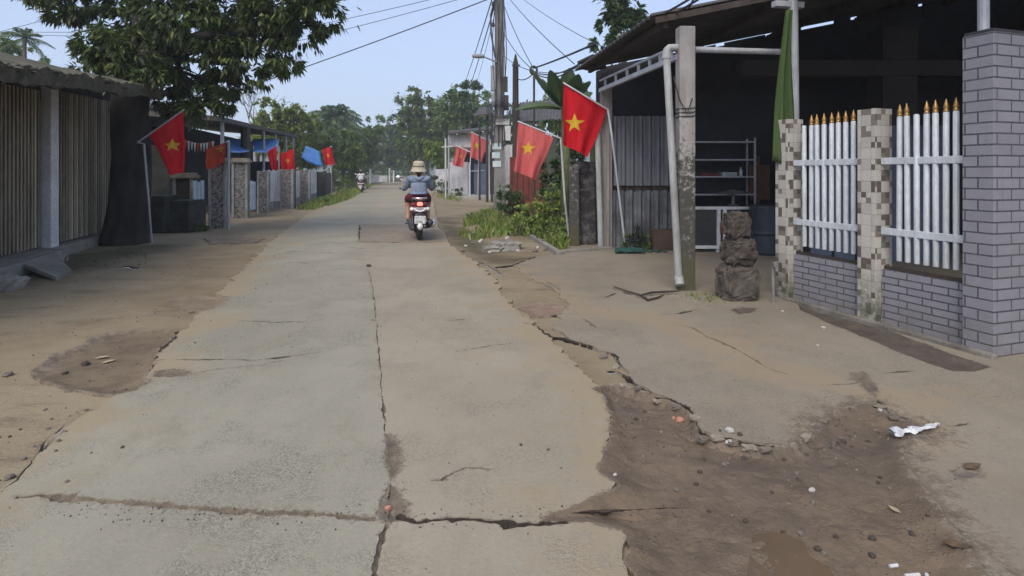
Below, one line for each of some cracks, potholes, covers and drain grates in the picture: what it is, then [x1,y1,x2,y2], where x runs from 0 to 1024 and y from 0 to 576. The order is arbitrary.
crack [532,314,774,447]
crack [474,257,535,274]
crack [574,507,676,515]
pothole [30,328,179,398]
pothole [542,383,986,576]
